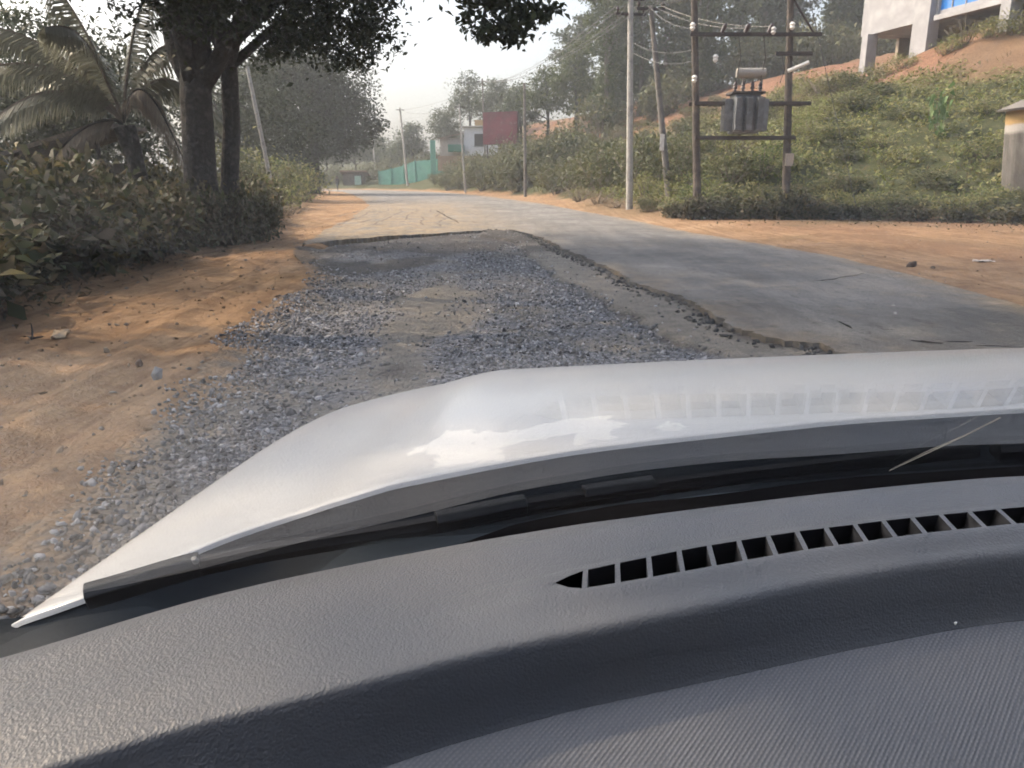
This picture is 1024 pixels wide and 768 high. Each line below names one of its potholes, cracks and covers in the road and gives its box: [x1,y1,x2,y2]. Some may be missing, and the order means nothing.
crack [330,209,455,226]
pothole [0,229,833,619]
